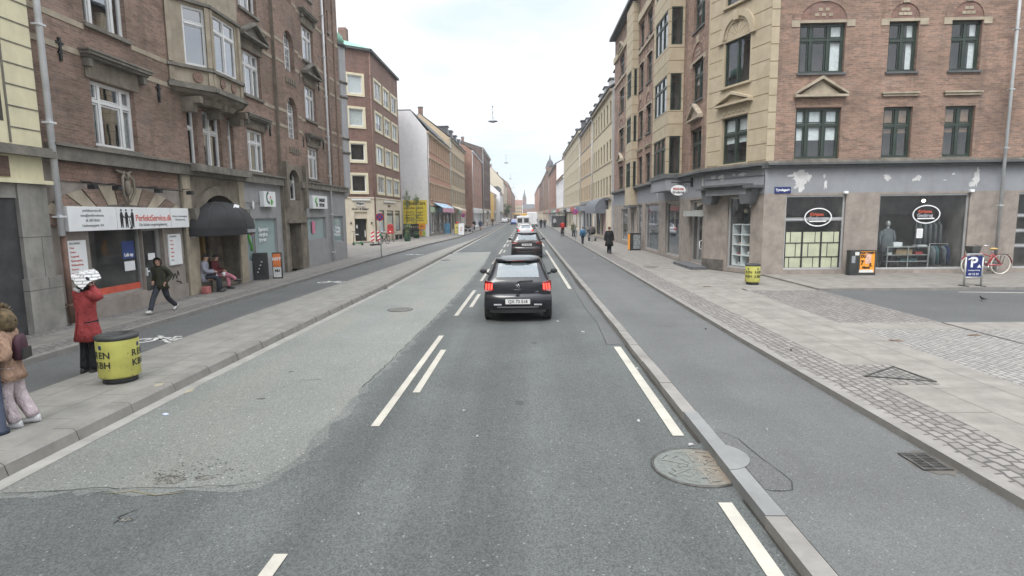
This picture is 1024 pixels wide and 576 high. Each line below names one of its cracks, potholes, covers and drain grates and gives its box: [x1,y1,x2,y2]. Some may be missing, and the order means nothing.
drain grate [897,452,954,471]
crack [16,483,246,523]
manhole cover [651,448,733,488]
